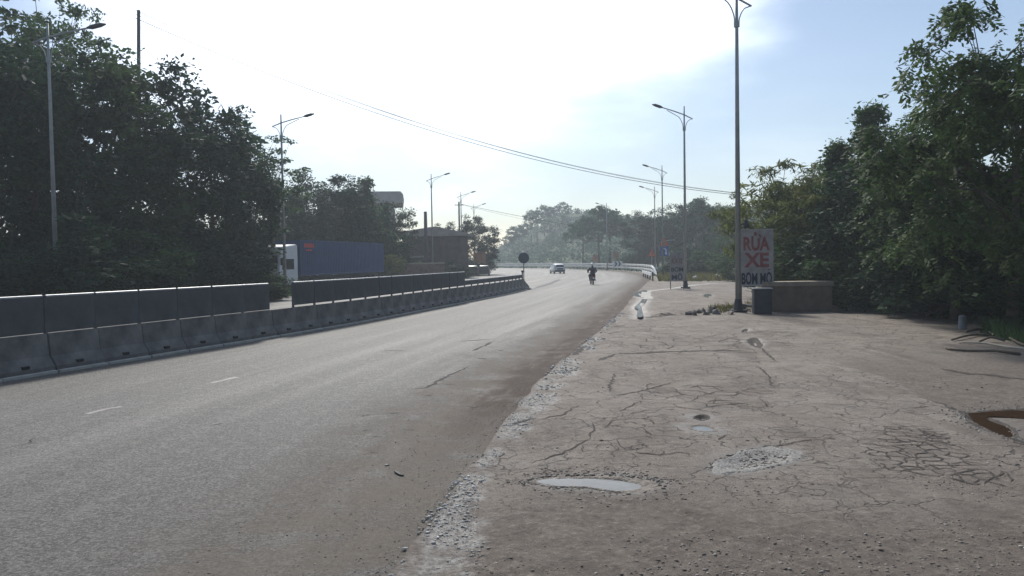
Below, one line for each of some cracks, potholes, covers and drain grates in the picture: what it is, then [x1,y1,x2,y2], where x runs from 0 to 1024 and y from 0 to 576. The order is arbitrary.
pothole [965,408,1024,439]
crack [513,329,791,463]
pothole [747,337,763,348]
pothole [711,446,803,475]
pothole [686,424,718,432]
crack [864,423,1013,486]
crack [754,431,829,448]
pothole [529,476,660,494]
